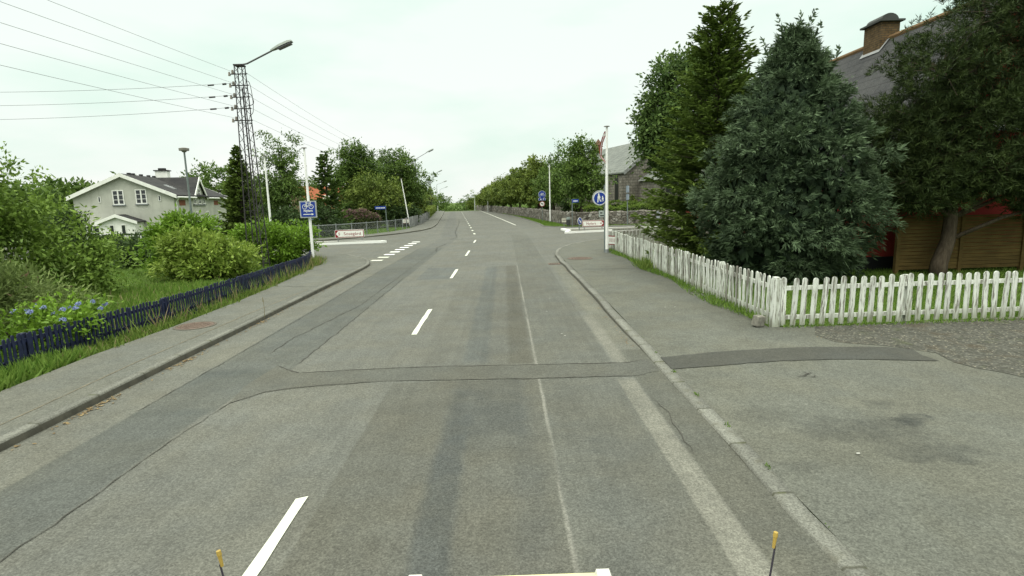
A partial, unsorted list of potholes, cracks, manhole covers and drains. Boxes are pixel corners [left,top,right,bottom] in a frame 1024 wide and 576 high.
manhole cover [173,321,217,330]
